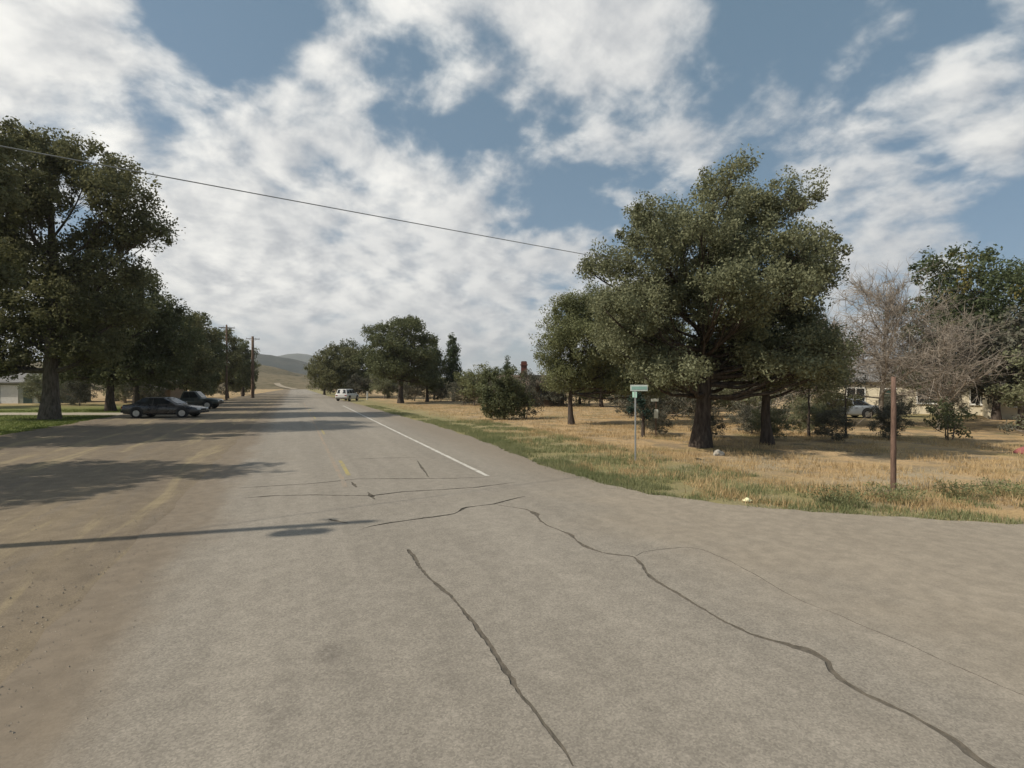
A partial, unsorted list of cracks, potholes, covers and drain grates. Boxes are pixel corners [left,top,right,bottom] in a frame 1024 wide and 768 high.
crack [244,457,1023,768]
